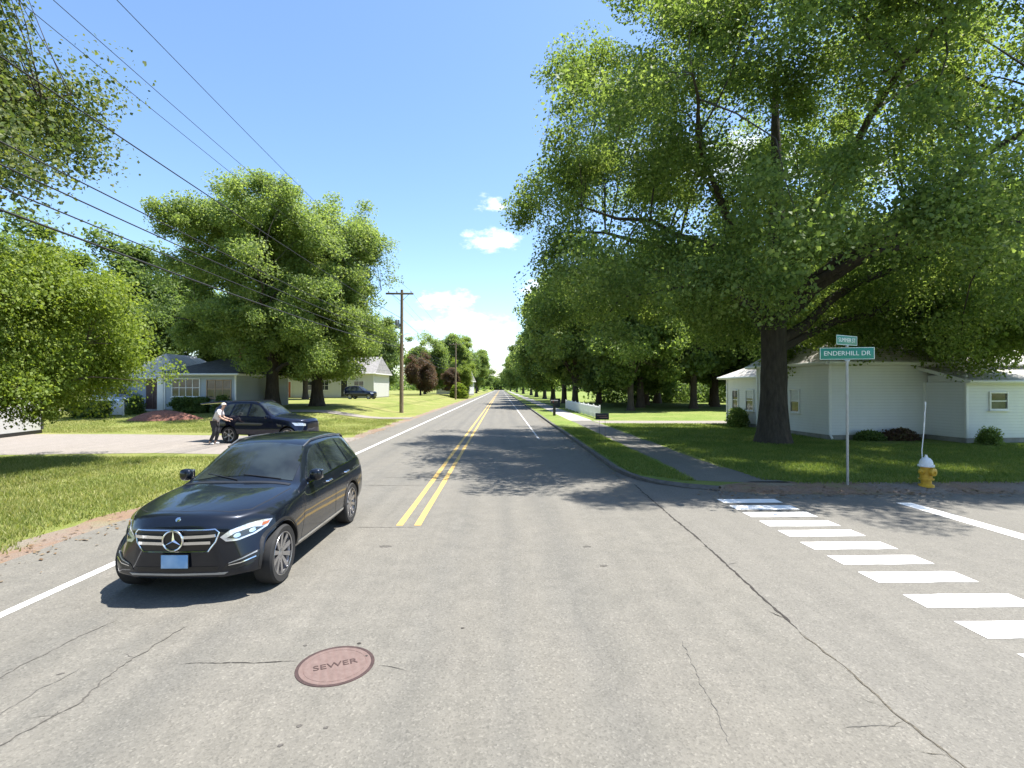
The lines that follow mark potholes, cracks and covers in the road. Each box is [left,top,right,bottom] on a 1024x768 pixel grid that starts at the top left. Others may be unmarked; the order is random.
crack [634,484,967,768]
manhole cover [294,646,375,687]
crack [0,626,186,746]
